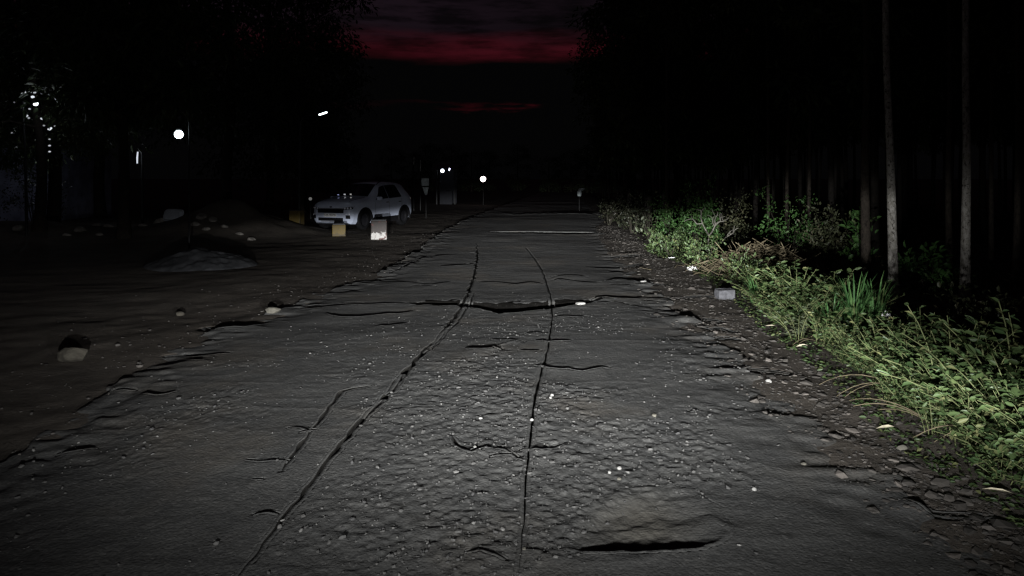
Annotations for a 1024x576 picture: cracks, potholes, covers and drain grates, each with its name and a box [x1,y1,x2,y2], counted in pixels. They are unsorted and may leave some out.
crack [112,387,180,395]
crack [740,366,790,375]
crack [164,244,740,576]
pothole [552,484,735,554]
